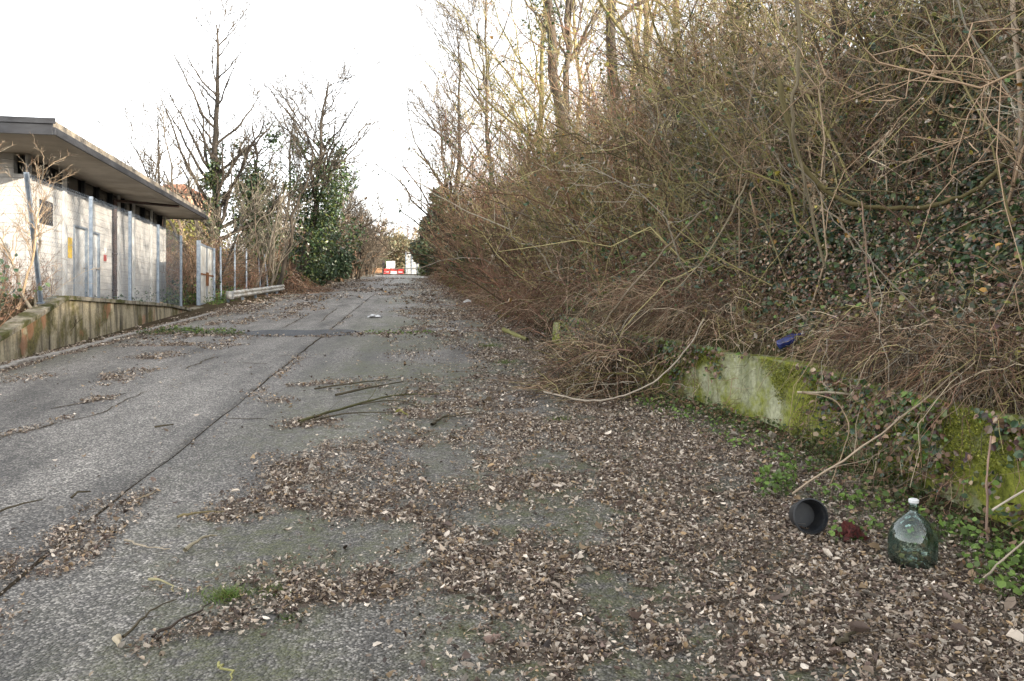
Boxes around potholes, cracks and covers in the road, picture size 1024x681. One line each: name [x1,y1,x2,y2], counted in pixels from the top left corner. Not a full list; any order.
crack [4,390,151,436]
